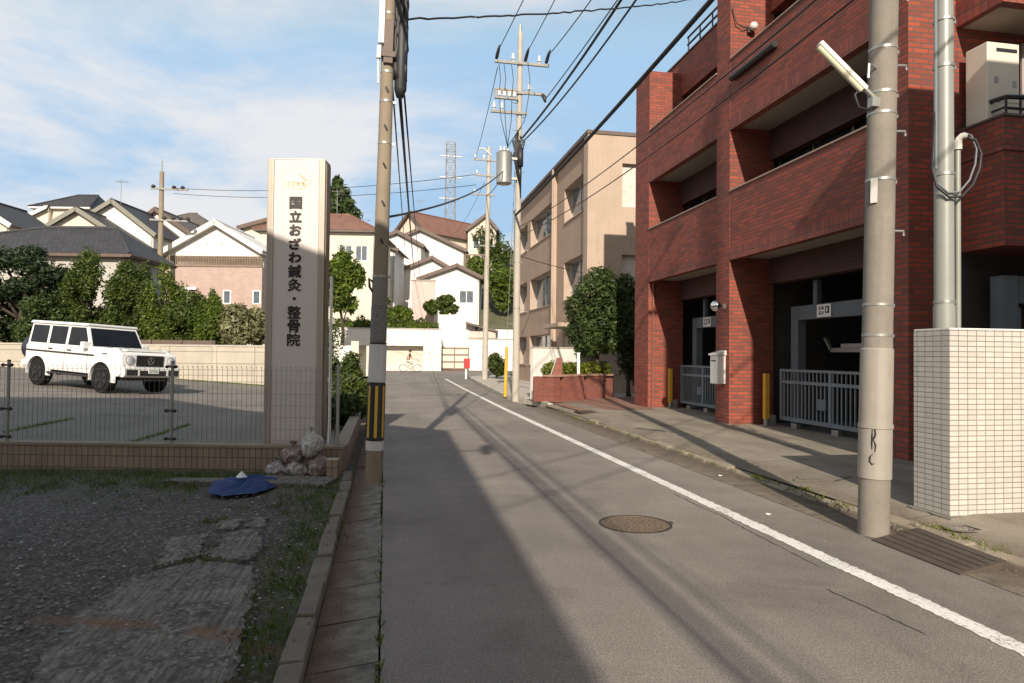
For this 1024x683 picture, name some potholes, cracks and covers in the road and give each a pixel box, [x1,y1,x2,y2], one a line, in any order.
crack [827,589,927,635]
manhole cover [599,515,674,534]
